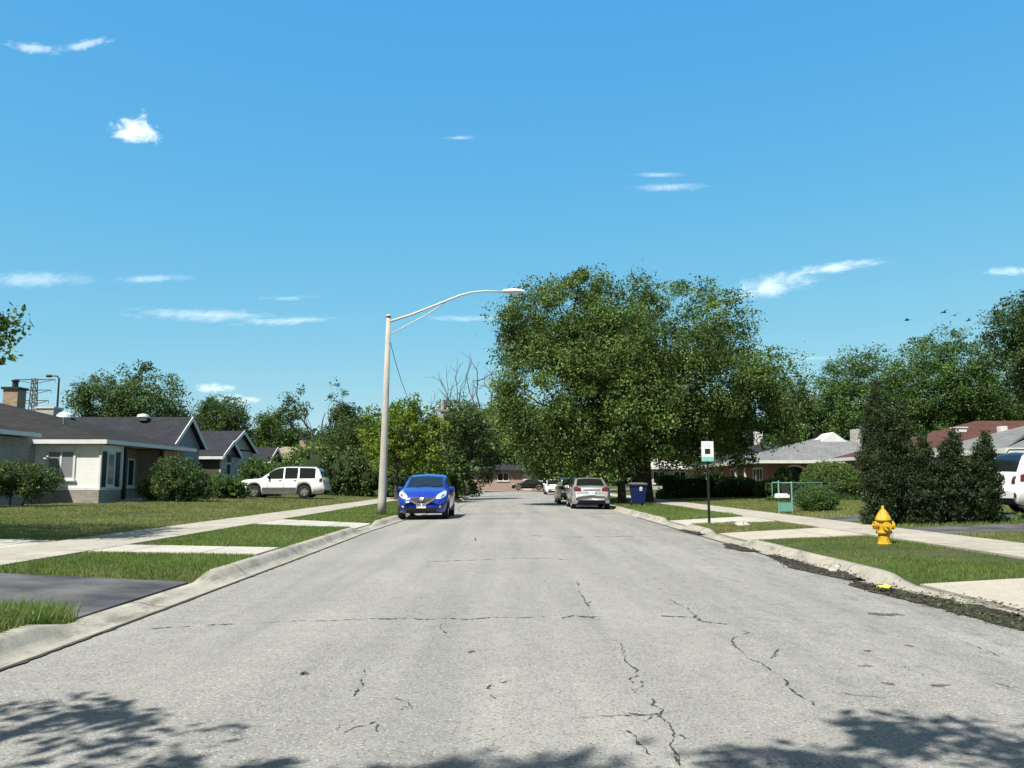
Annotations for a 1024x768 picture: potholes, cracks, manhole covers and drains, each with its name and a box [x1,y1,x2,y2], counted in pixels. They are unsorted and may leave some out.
crack [586,644,691,765]
crack [731,630,815,705]
crack [153,582,724,639]
